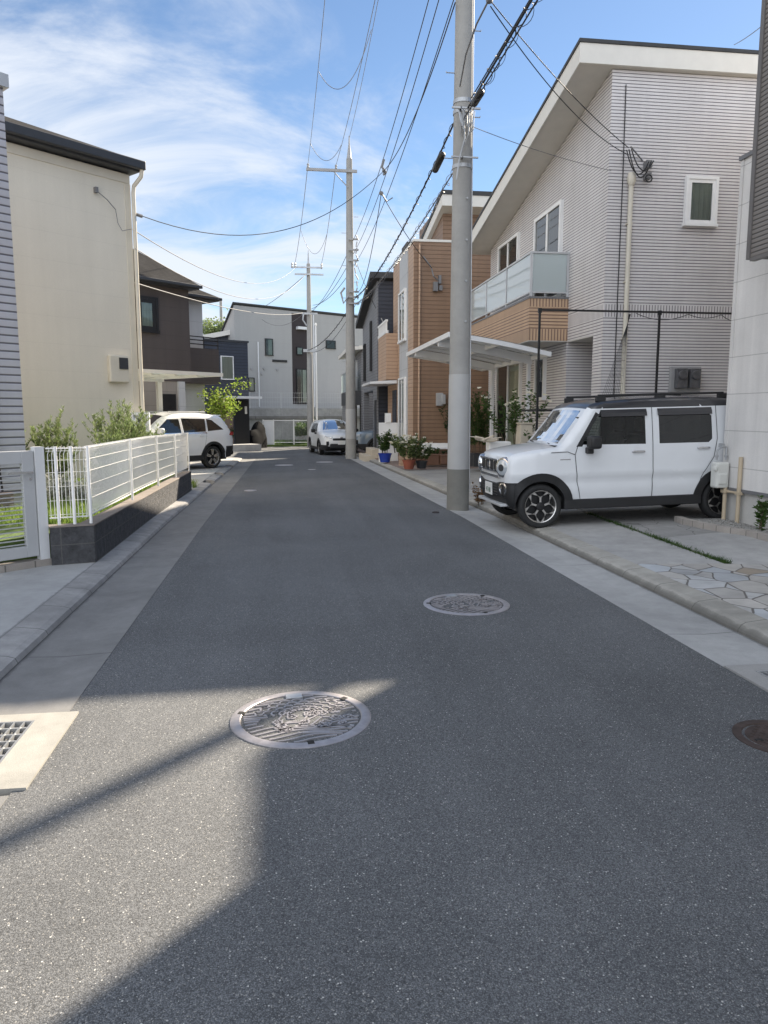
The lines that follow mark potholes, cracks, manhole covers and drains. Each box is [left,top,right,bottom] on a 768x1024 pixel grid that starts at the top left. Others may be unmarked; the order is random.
drain grate [0,711,79,796]
manhole cover [732,720,768,753]
manhole cover [230,691,371,749]
manhole cover [423,593,510,616]
